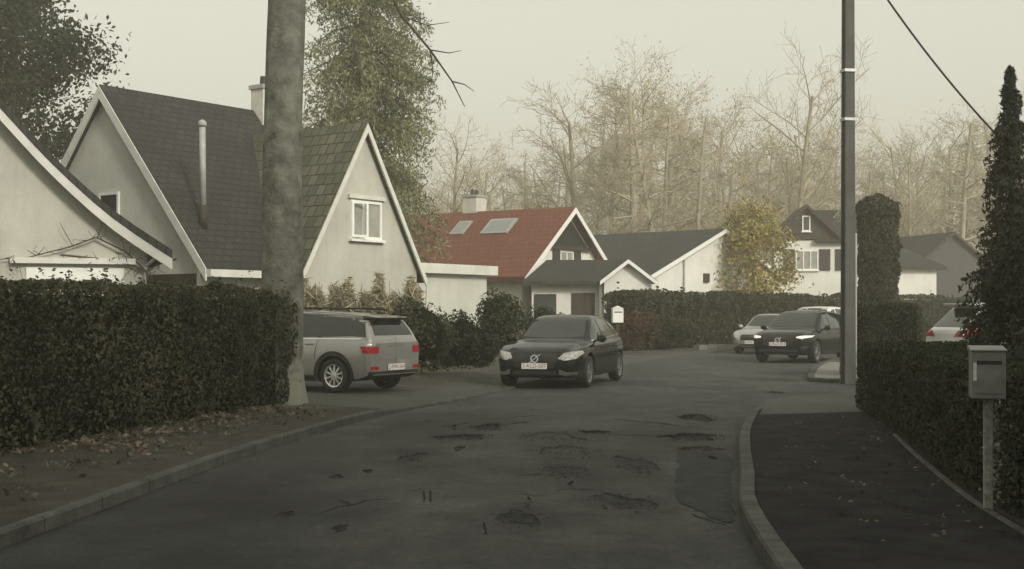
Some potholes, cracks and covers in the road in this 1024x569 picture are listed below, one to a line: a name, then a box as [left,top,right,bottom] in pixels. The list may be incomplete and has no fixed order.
crack [318,499,386,514]
pothole [591,493,660,510]
pothole [496,509,540,527]
pothole [613,456,661,475]
pothole [676,414,716,422]
pothole [661,433,717,441]
pothole [539,445,588,459]
pothole [542,466,588,478]
pothole [522,431,588,442]
pothole [397,453,425,462]
